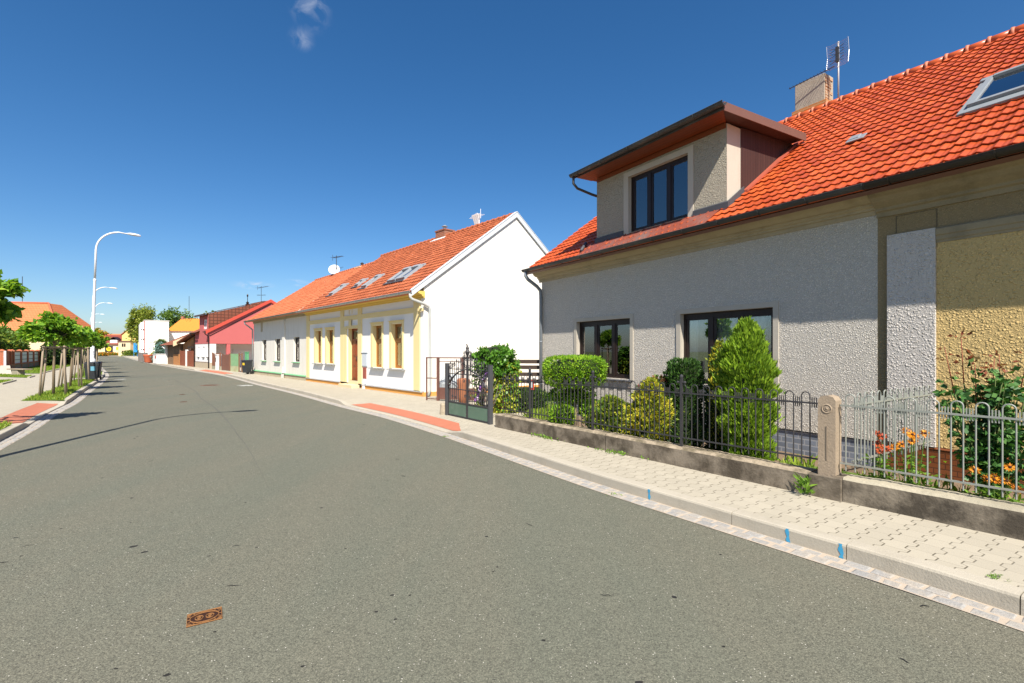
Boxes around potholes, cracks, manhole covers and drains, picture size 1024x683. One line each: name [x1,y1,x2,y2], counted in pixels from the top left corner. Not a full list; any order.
manhole cover [186,606,222,628]
